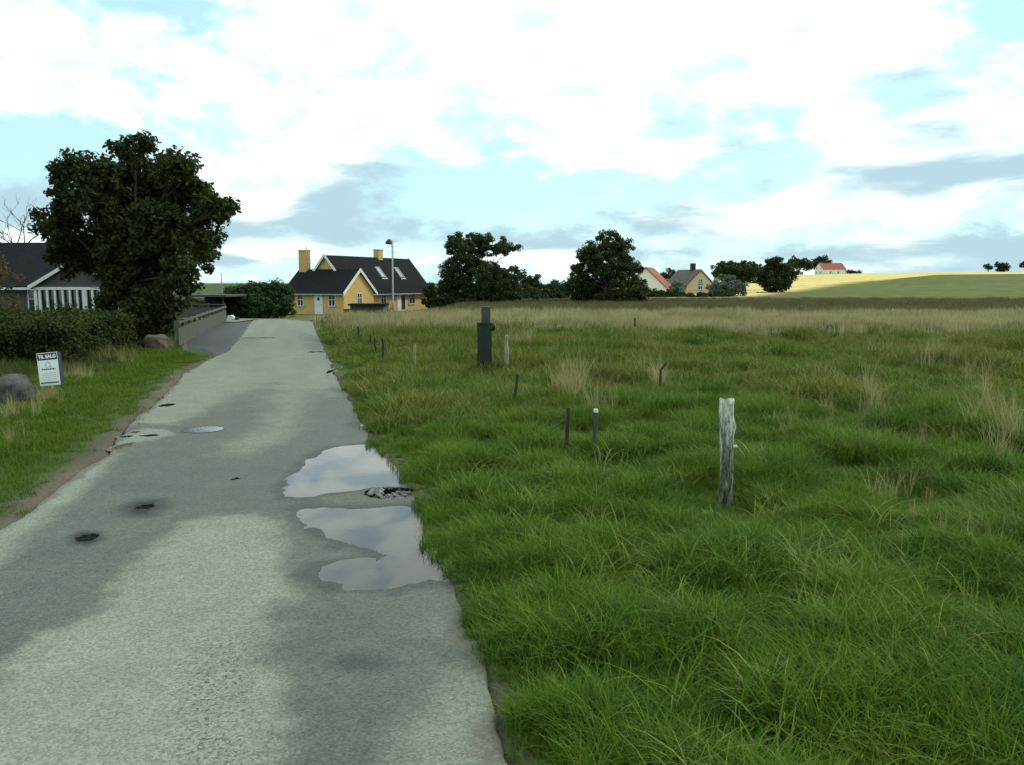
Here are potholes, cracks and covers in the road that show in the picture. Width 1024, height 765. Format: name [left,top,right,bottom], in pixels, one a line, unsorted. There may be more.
pothole [69,532,105,543]
pothole [359,487,423,500]
